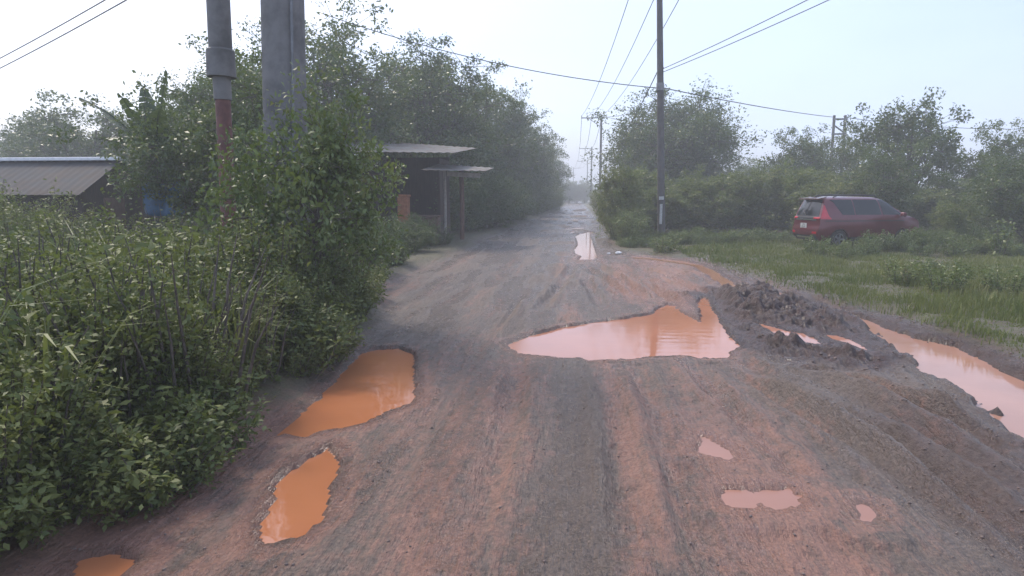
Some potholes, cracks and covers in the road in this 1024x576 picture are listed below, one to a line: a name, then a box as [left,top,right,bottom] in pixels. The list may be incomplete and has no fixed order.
pothole [848,499,888,524]
pothole [273,345,423,438]
pothole [752,482,808,510]
pothole [715,483,767,508]
pothole [251,440,351,547]
pothole [568,230,607,260]
pothole [758,322,828,344]
pothole [505,295,747,360]
pothole [823,332,875,351]
pothole [692,434,743,460]
pothole [62,542,156,576]
